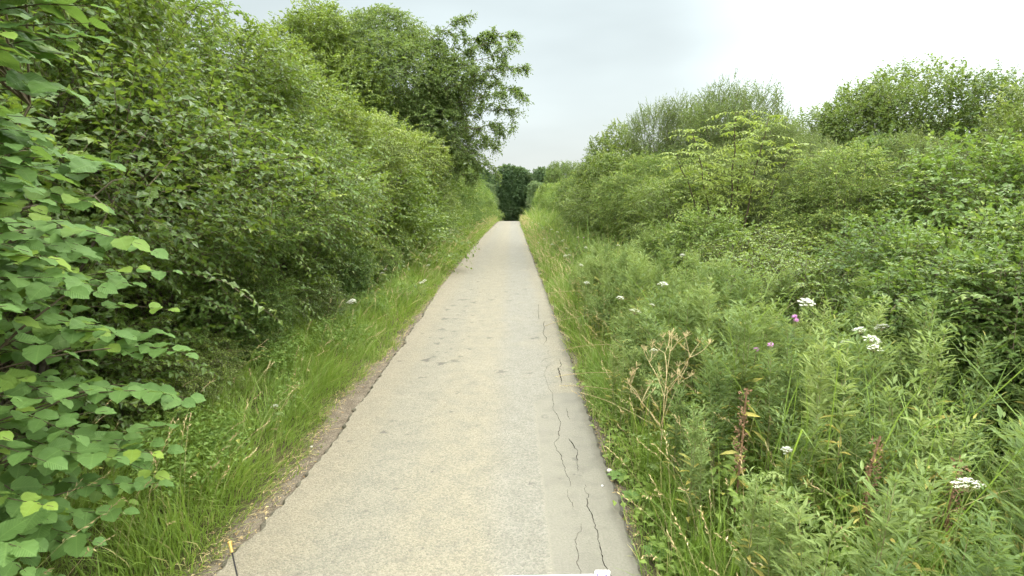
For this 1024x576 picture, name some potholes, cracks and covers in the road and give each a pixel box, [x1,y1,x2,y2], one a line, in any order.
crack [538,305,611,576]
